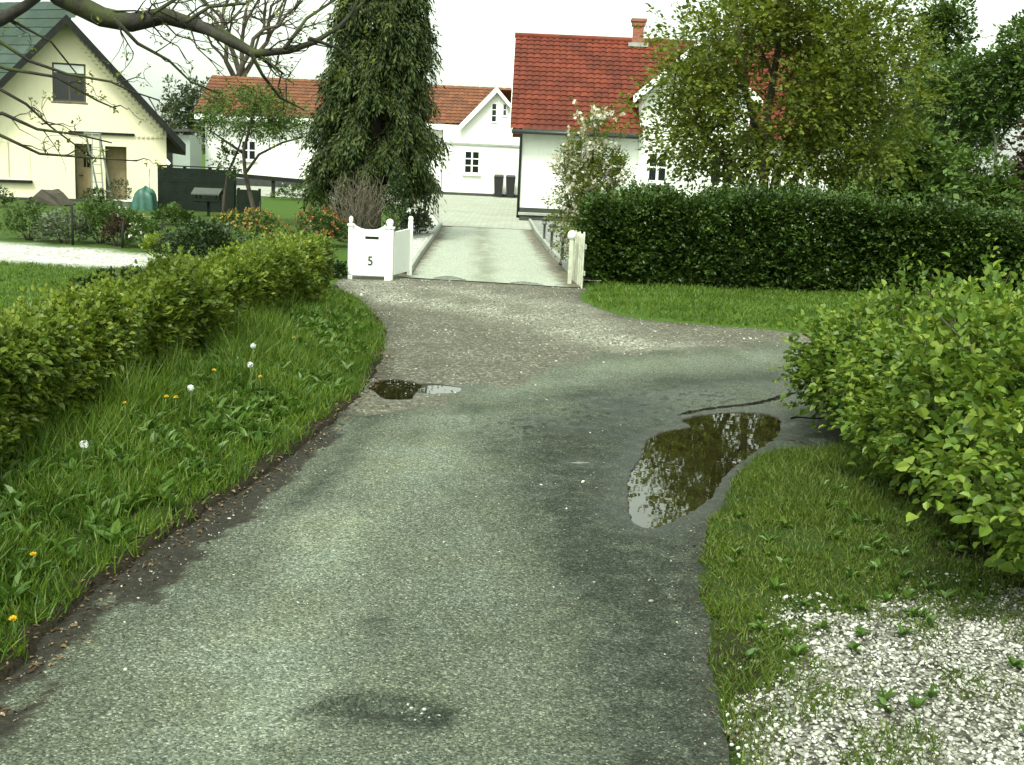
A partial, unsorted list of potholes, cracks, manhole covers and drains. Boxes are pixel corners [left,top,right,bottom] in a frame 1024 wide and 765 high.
pothole [366,379,462,400]
crack [677,392,825,419]
